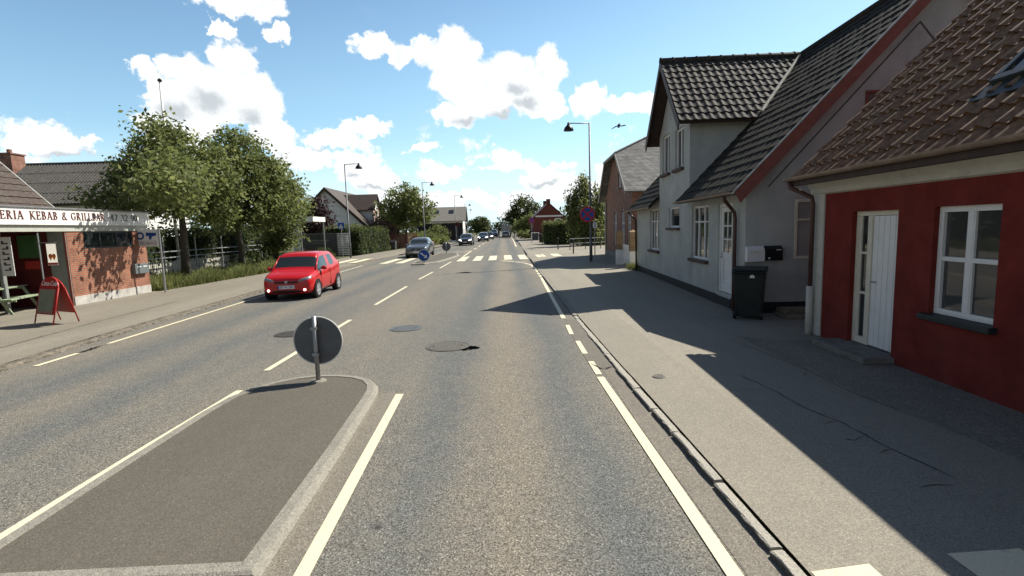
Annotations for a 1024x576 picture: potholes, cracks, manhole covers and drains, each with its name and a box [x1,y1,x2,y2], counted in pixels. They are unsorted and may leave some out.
manhole cover [426,341,470,352]
crack [742,376,957,487]
